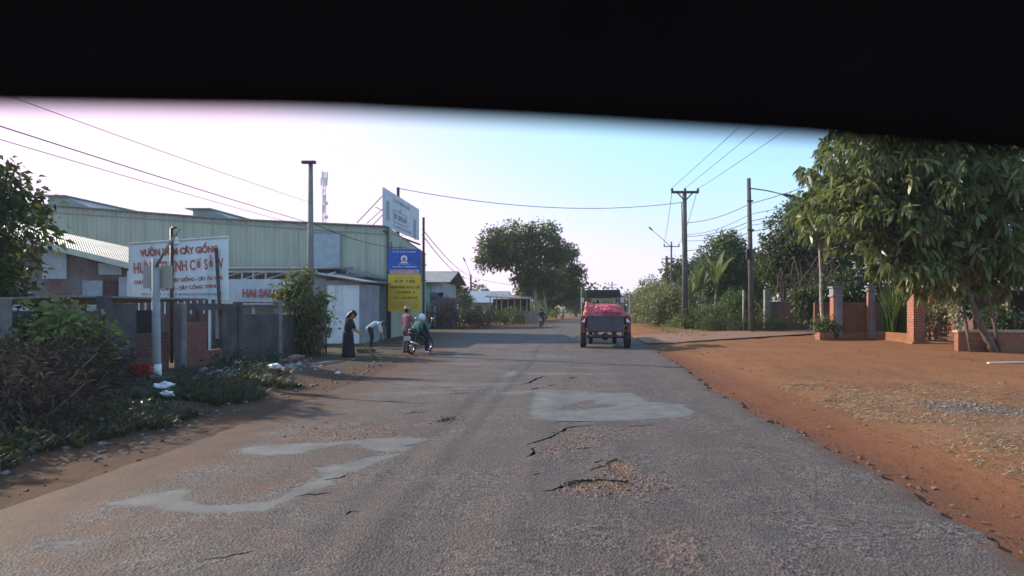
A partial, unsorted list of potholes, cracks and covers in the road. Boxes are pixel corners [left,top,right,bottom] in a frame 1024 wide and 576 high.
crack [527,421,607,491]
crack [205,551,252,560]
crack [295,474,349,497]
pothole [568,479,635,491]
pothole [606,459,628,475]
